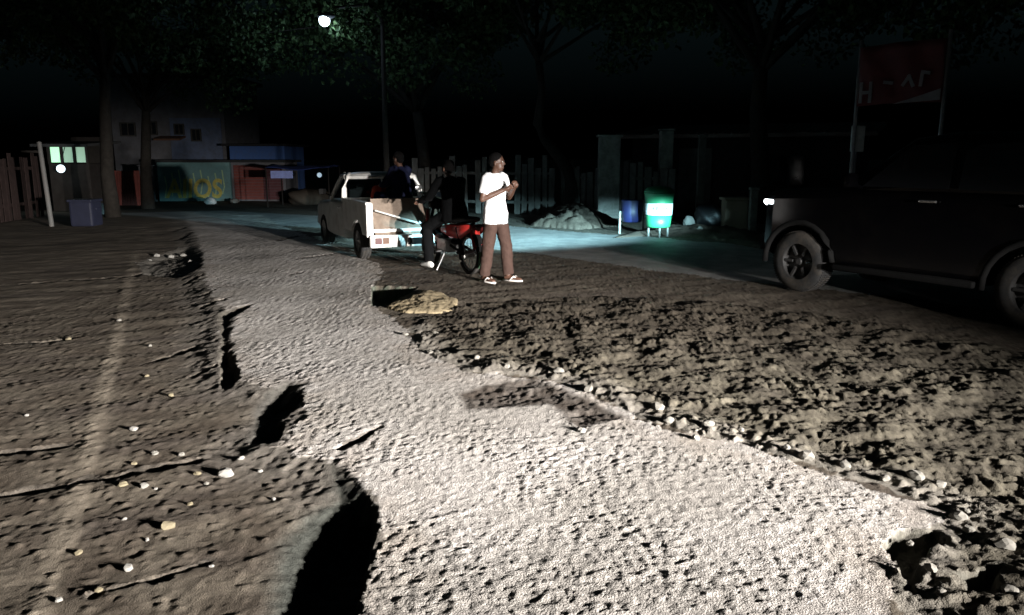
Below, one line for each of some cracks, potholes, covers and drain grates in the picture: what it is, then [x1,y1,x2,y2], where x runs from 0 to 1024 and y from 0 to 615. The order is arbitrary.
pothole [217,303,256,390]
pothole [249,452,383,615]
pothole [882,528,952,593]
crack [0,337,80,345]
pothole [241,378,309,446]
crack [144,346,220,384]
crack [337,425,384,450]
crack [84,558,215,600]
pothole [371,285,419,306]
crack [0,443,75,456]
pothole [954,561,1005,593]
crack [0,457,207,498]
